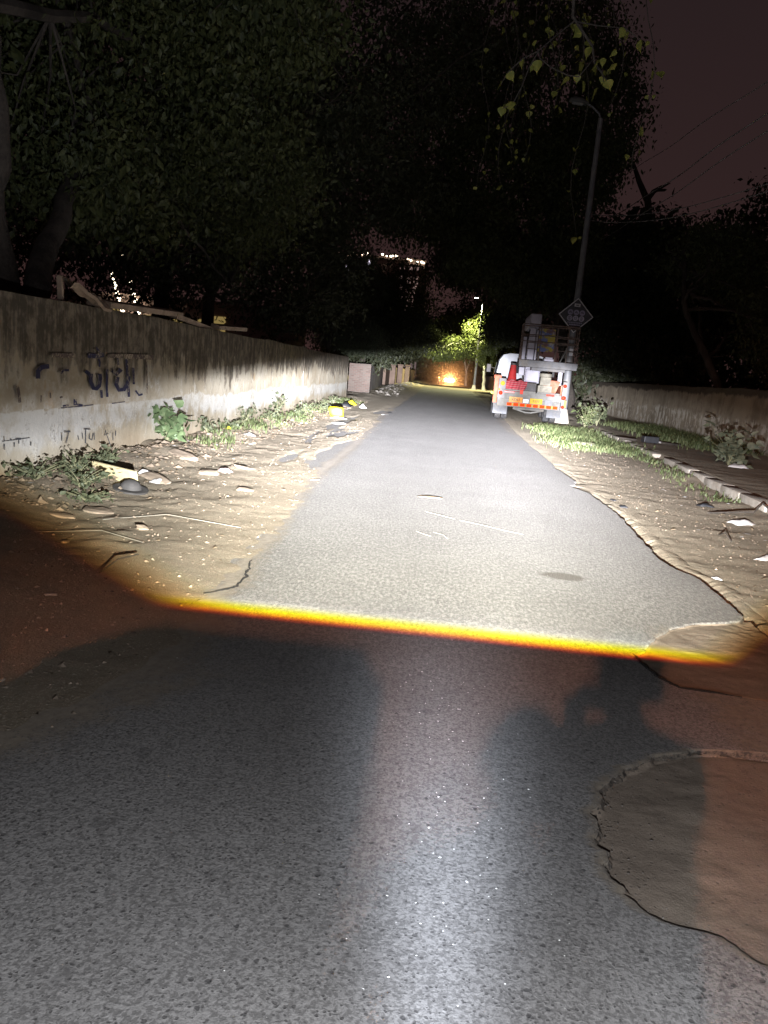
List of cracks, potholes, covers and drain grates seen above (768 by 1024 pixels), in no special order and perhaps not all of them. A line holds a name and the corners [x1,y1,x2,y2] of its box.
crack [632,653,742,698]
pothole [590,750,768,966]
crack [204,560,252,594]
